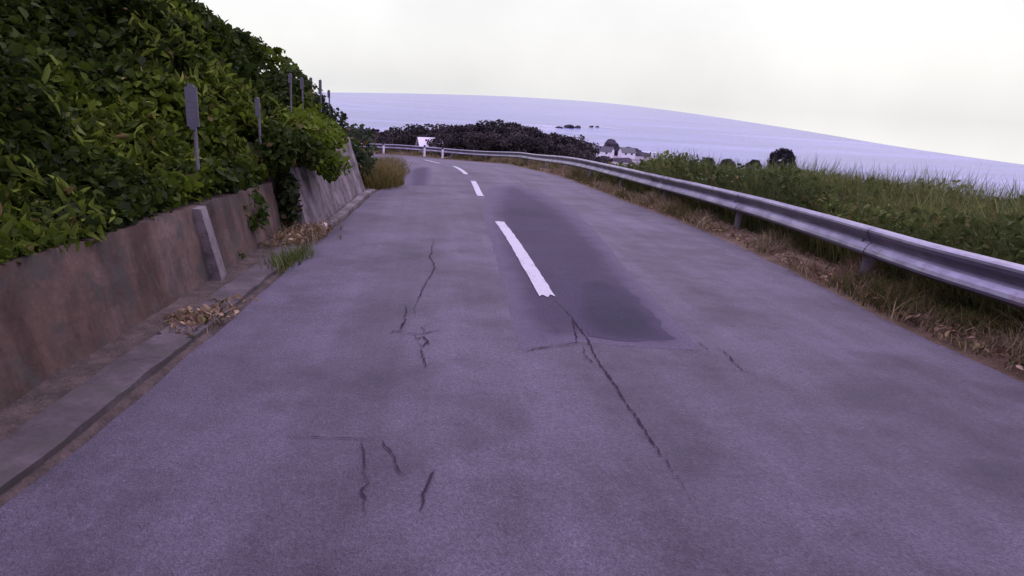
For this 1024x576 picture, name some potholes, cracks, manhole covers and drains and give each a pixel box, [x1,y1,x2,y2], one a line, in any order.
crack [420,471,434,510]
crack [392,239,437,367]
